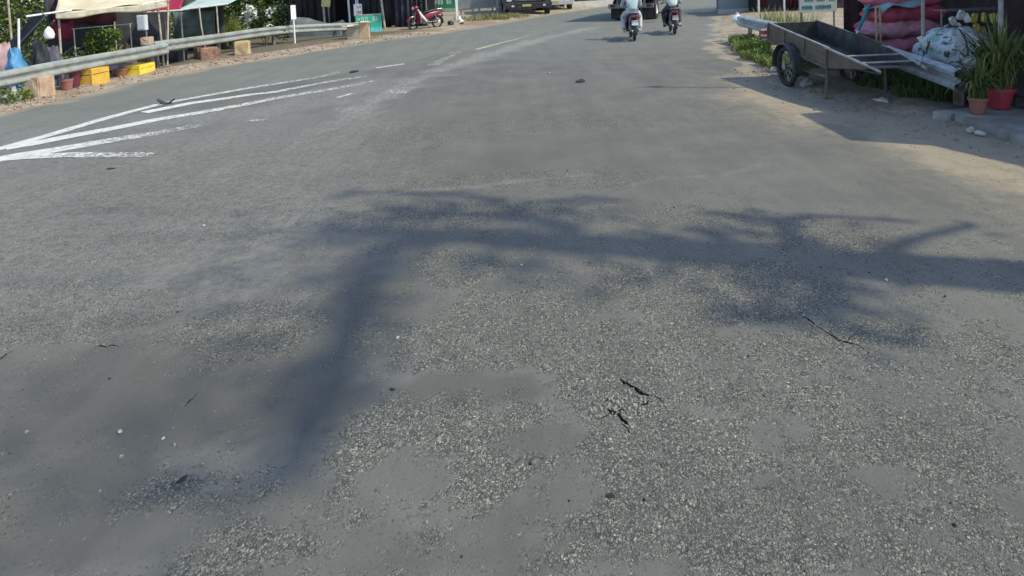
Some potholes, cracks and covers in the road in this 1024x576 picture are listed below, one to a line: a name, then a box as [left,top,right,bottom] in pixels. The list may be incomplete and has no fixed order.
crack [574,378,671,433]
crack [802,316,864,349]
